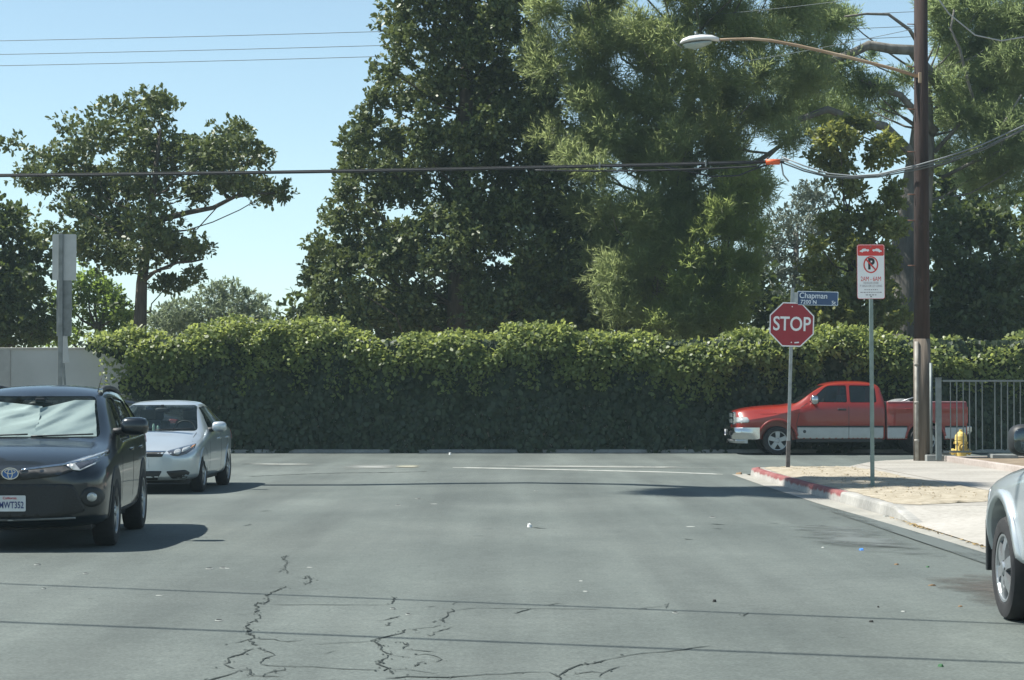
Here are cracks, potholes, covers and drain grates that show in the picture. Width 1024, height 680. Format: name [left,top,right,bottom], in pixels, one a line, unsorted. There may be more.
crack [550,645,712,680]
crack [204,555,577,680]
